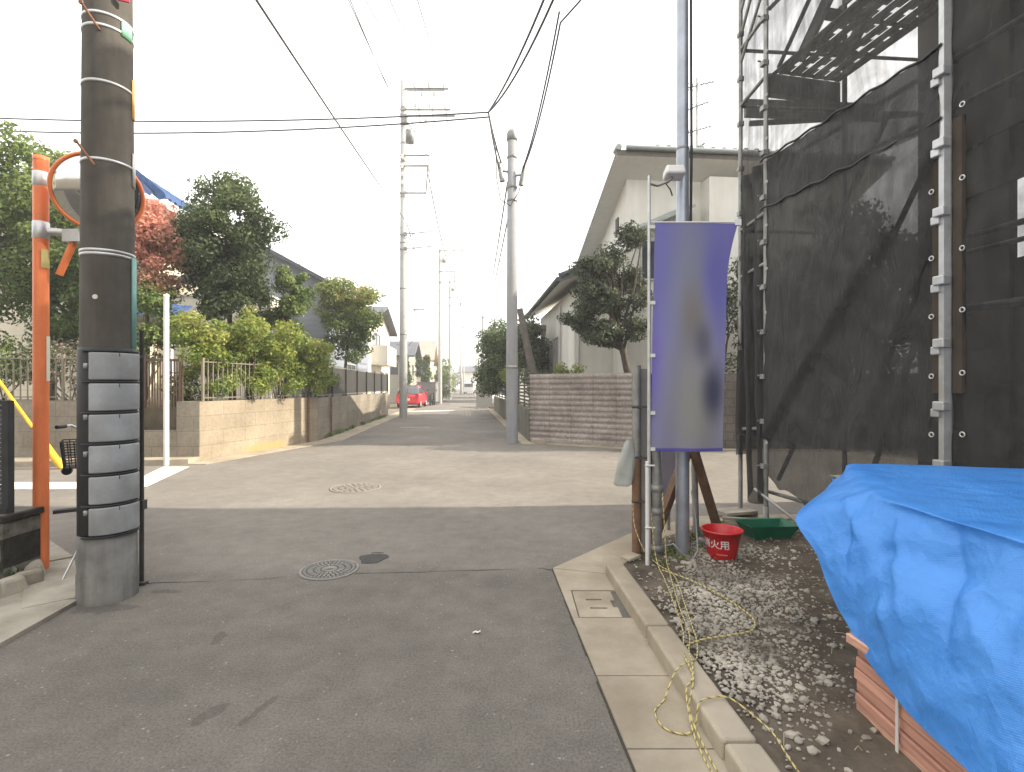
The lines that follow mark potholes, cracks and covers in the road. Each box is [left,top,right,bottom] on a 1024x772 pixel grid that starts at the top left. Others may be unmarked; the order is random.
manhole cover [329,483,382,493]
manhole cover [298,559,360,580]
